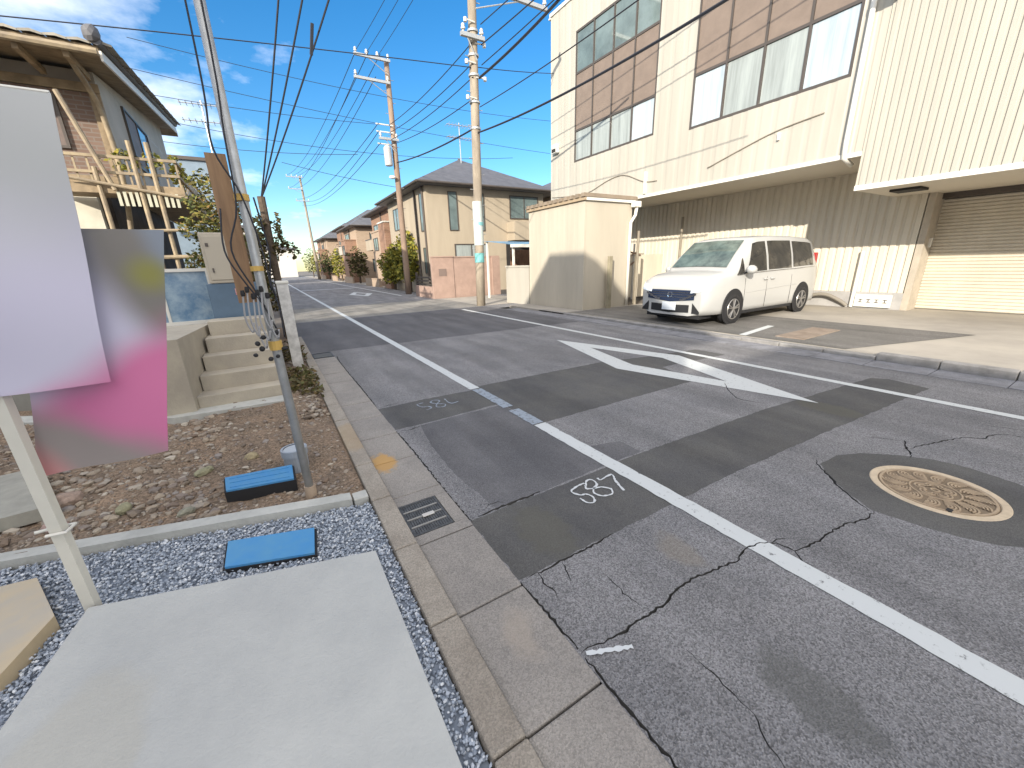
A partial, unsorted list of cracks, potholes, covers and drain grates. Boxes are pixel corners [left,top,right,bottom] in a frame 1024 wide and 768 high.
crack [539,460,873,651]
manhole cover [869,465,1014,521]
drain grate [398,496,454,538]
crack [871,426,1020,457]
